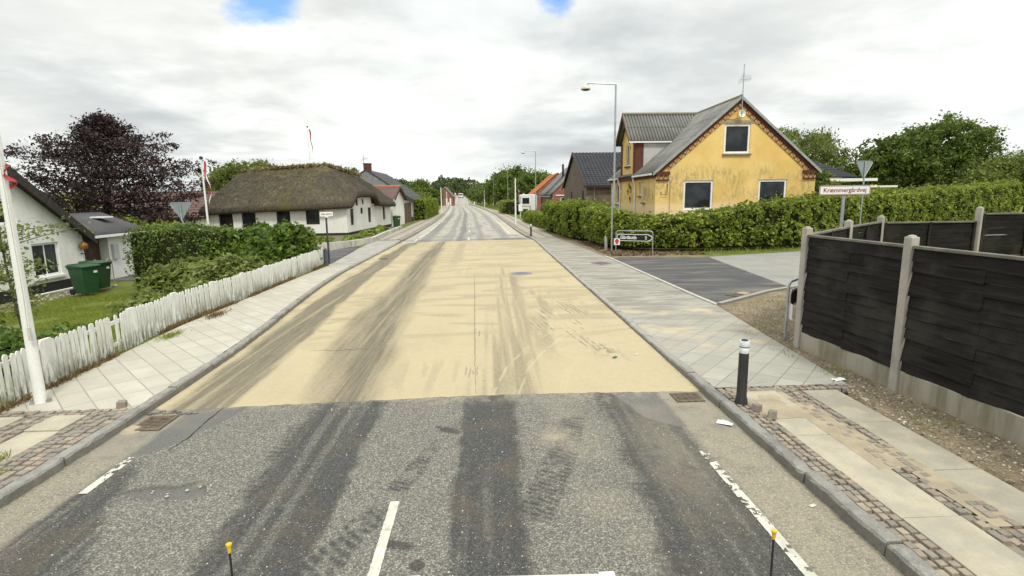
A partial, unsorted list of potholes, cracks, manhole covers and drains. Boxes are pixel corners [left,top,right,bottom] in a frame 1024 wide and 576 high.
drain grate [135,415,179,431]
drain grate [670,392,705,402]
